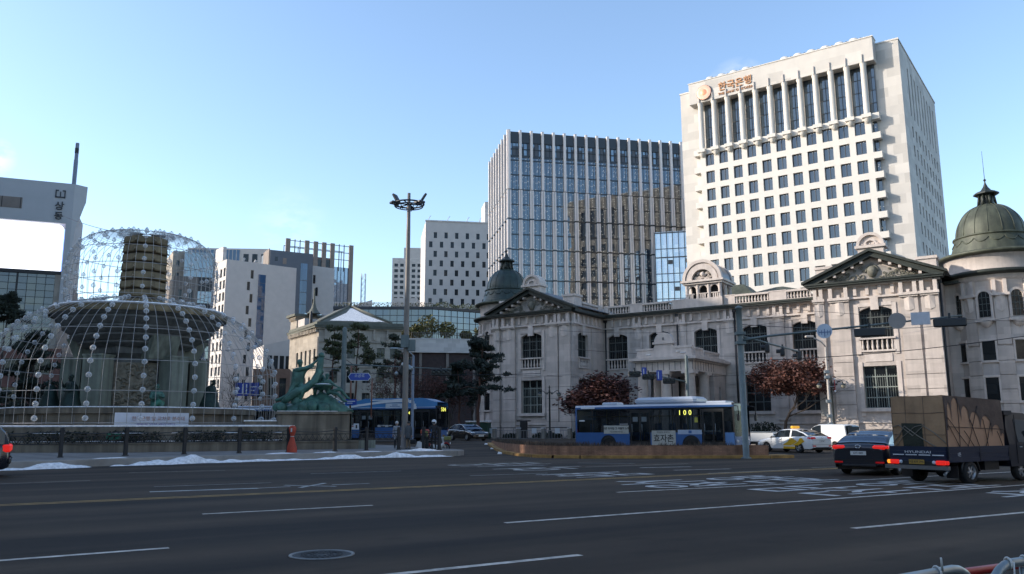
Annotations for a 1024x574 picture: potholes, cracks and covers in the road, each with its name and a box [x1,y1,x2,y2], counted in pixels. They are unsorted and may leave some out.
manhole cover [289,549,355,560]
